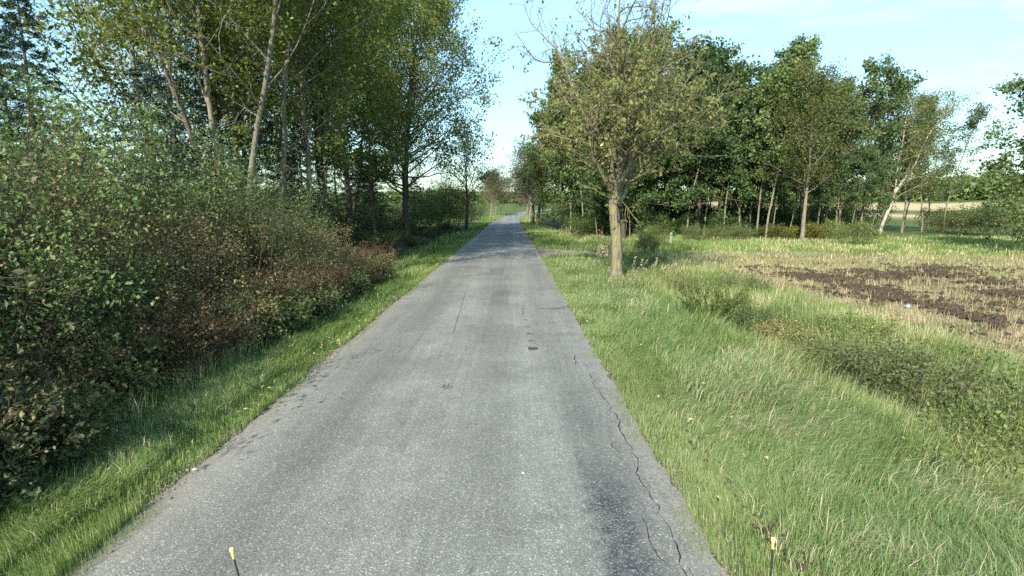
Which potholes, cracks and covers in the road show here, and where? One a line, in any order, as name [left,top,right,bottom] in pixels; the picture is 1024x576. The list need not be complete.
crack [574,357,693,576]
